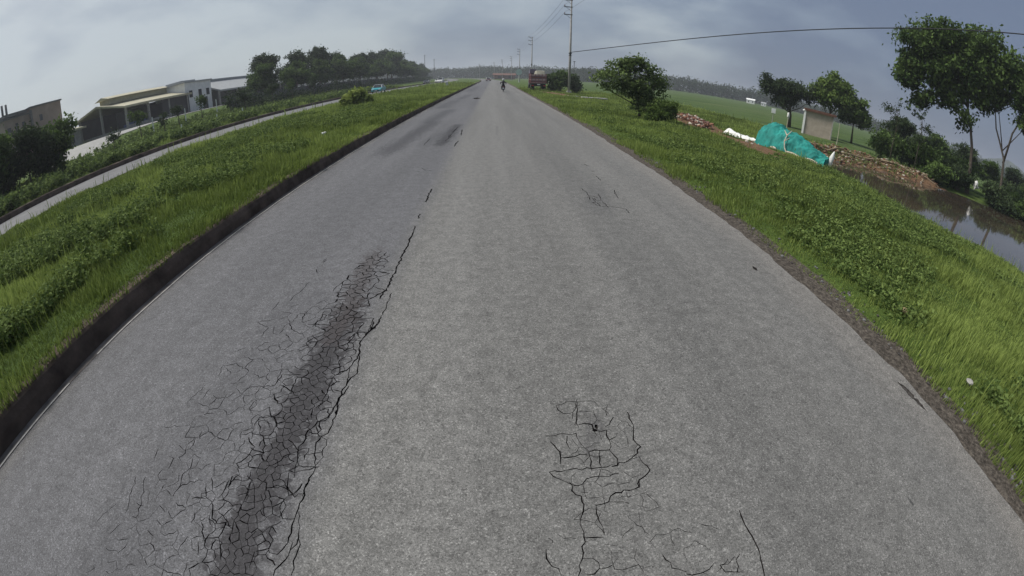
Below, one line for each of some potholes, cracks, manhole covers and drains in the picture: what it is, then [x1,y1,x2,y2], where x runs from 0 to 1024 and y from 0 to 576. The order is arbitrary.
crack [739,510,765,576]
crack [546,400,740,576]
